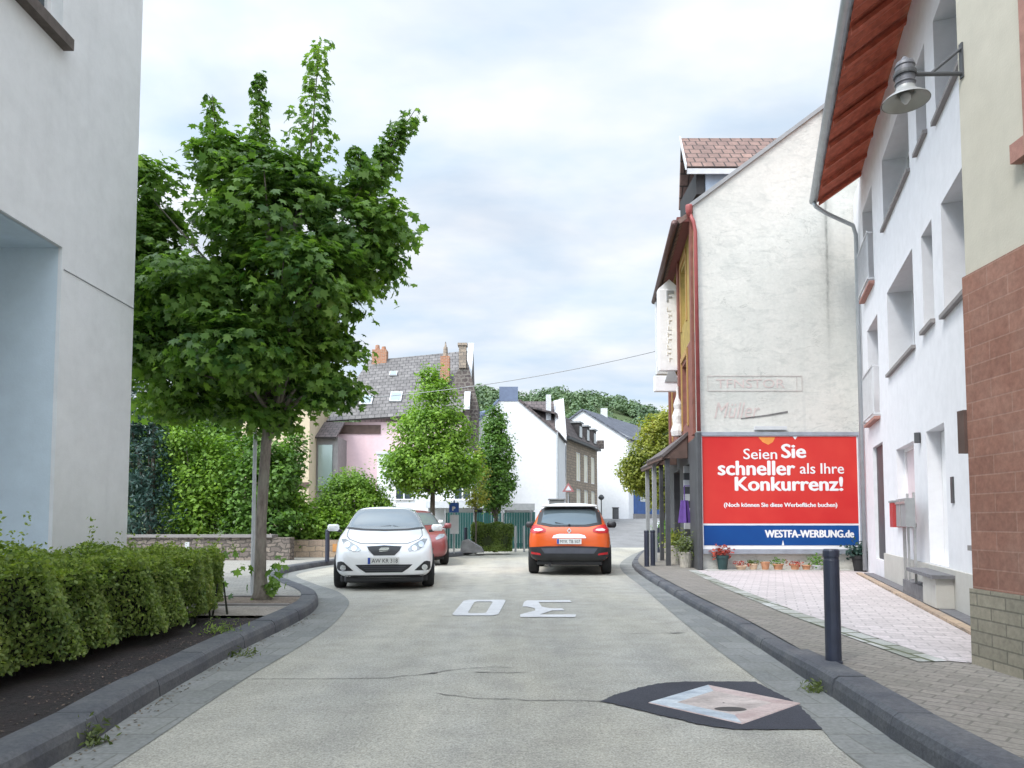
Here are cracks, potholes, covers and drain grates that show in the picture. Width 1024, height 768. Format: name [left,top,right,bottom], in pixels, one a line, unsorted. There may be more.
manhole cover [649,685,800,724]
crack [256,666,515,679]
